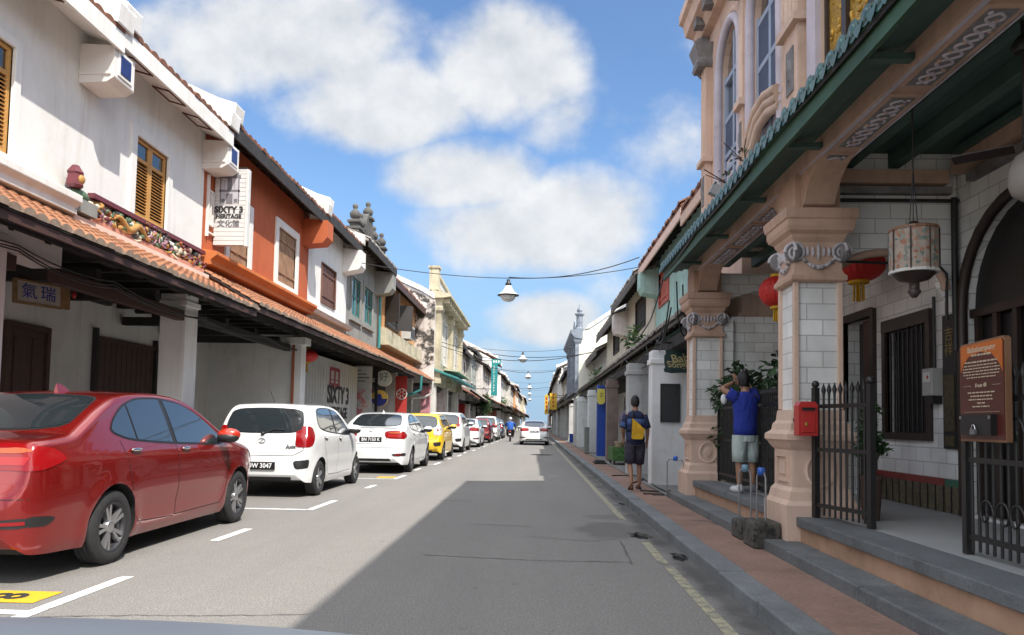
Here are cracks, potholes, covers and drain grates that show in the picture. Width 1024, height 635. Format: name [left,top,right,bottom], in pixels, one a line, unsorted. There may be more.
crack [424,536,633,565]
pothole [626,531,656,539]
